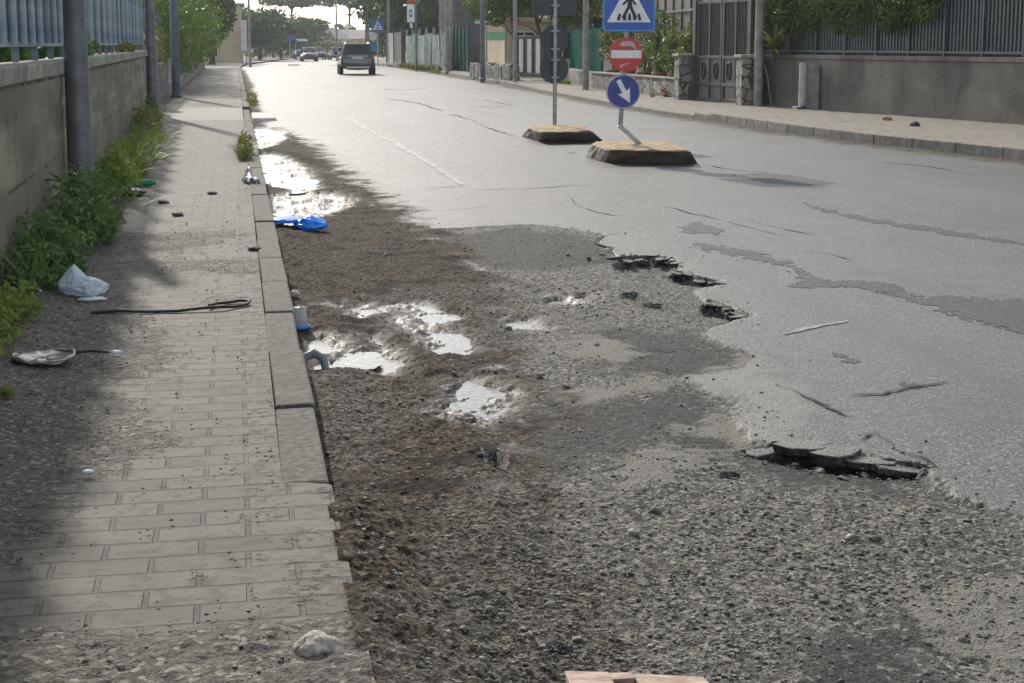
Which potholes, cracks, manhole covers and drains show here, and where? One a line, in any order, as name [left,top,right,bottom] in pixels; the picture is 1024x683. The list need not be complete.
crack [664,206,851,260]
crack [388,97,513,136]
pothole [669,271,730,288]
pothole [619,292,642,300]
pothole [739,439,935,481]
pothole [698,299,747,322]
